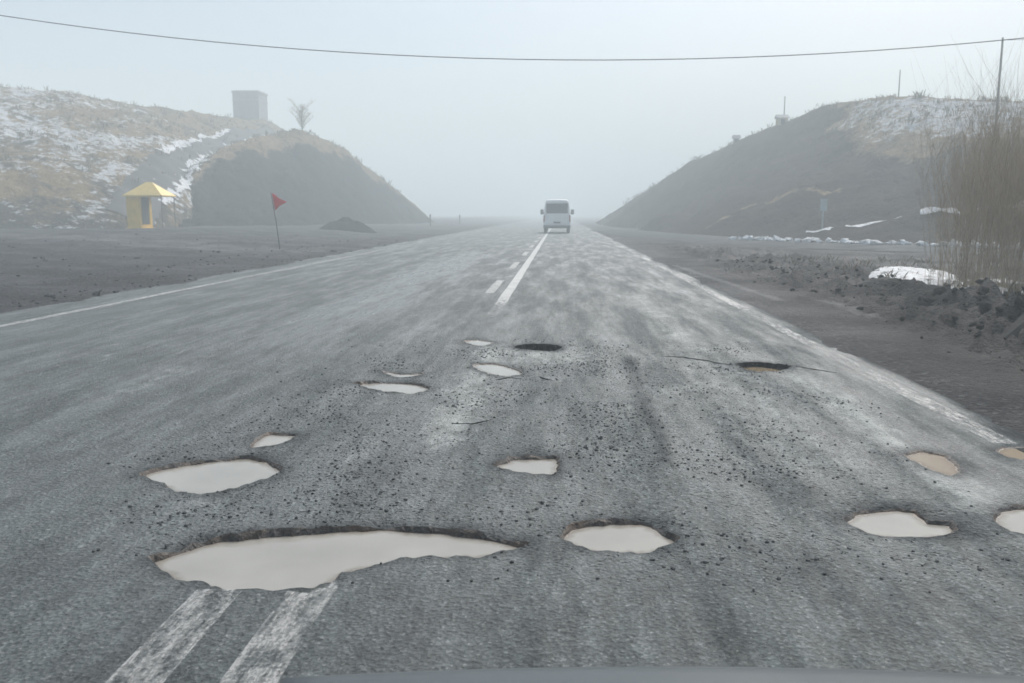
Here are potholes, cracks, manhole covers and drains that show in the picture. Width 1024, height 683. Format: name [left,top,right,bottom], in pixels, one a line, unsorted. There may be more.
pothole [492,455,561,474]
pothole [353,380,432,394]
pothole [993,504,1024,534]
pothole [148,525,531,591]
crack [665,356,731,365]
pothole [250,432,298,448]
pothole [736,362,792,372]
pothole [472,363,524,376]
pothole [139,455,284,494]
